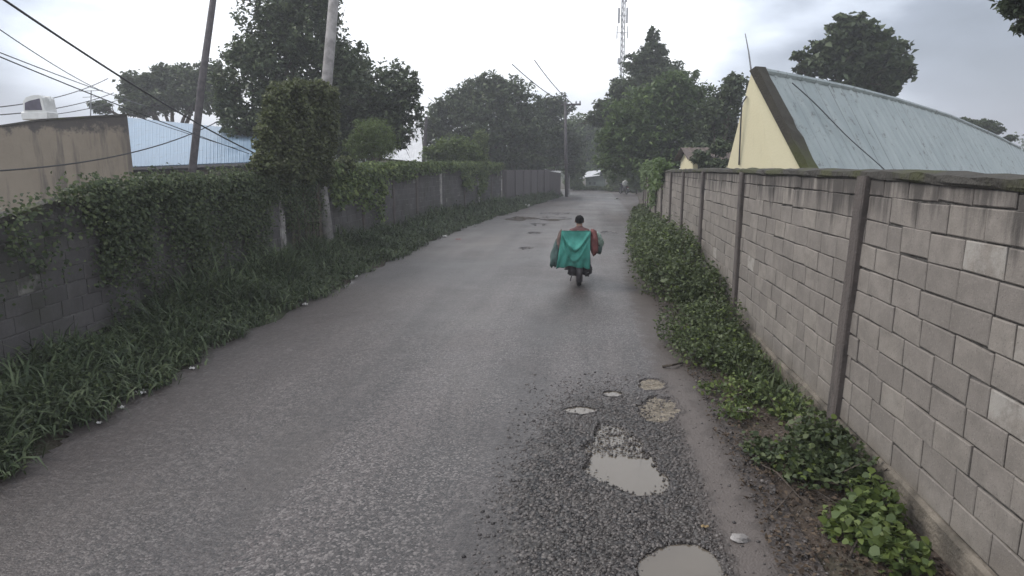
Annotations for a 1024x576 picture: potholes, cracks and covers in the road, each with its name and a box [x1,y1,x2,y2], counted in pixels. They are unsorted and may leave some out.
pothole [572,415,679,504]
pothole [635,377,668,391]
pothole [562,405,599,415]
pothole [628,538,737,576]
pothole [633,393,686,425]
